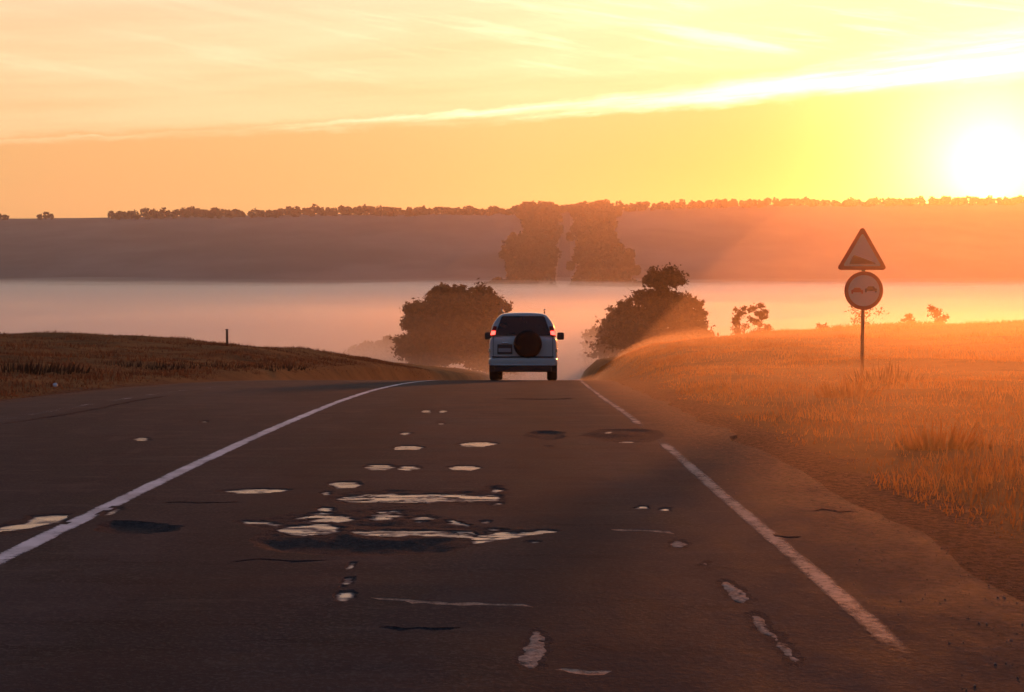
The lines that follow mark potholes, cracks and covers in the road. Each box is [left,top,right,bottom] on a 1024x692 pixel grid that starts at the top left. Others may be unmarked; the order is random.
pothole [322,484,512,506]
pothole [714,578,757,605]
pothole [231,506,563,556]
pothole [332,589,359,601]
pothole [579,428,666,443]
pothole [523,430,568,440]
pothole [666,538,692,549]
pothole [93,520,184,534]
pothole [743,610,807,668]
pothole [338,576,357,587]
pothole [0,512,74,535]
crack [375,598,532,607]
